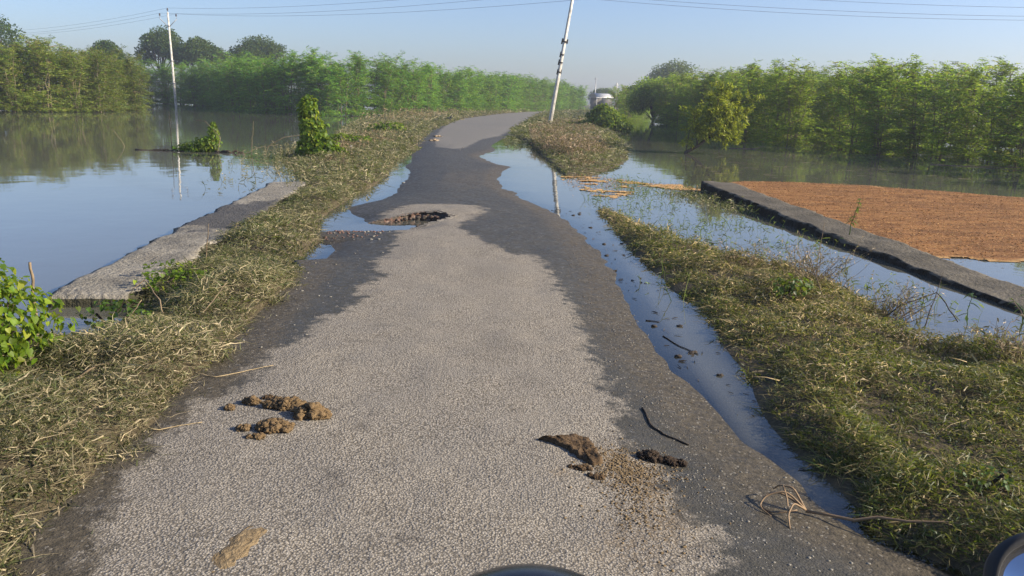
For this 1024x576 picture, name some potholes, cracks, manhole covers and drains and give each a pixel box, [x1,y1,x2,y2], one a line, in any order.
pothole [368,210,457,230]
